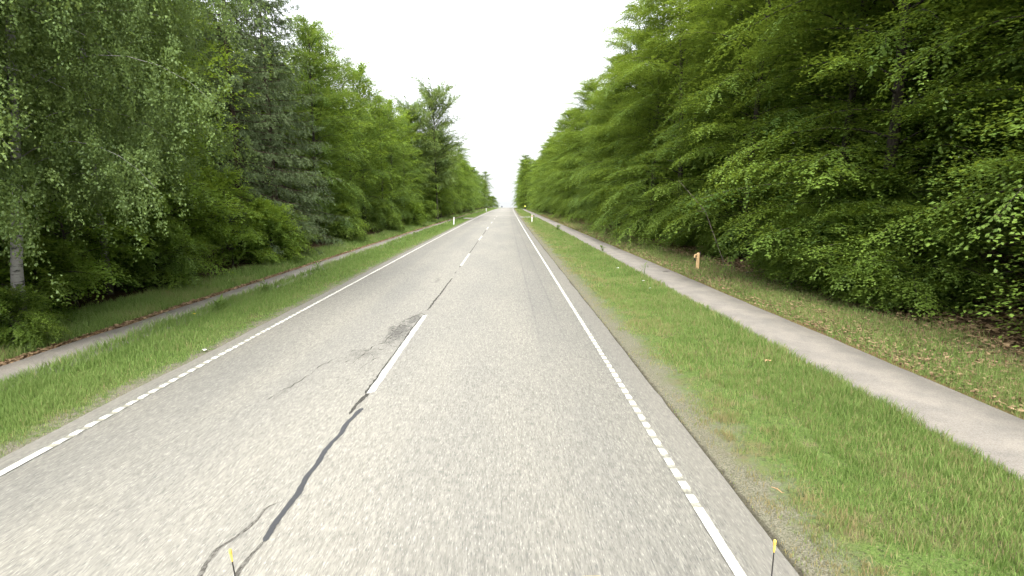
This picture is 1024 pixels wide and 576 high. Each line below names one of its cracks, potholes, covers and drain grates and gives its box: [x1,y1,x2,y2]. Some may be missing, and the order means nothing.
crack [267,314,424,400]
crack [197,502,278,576]
